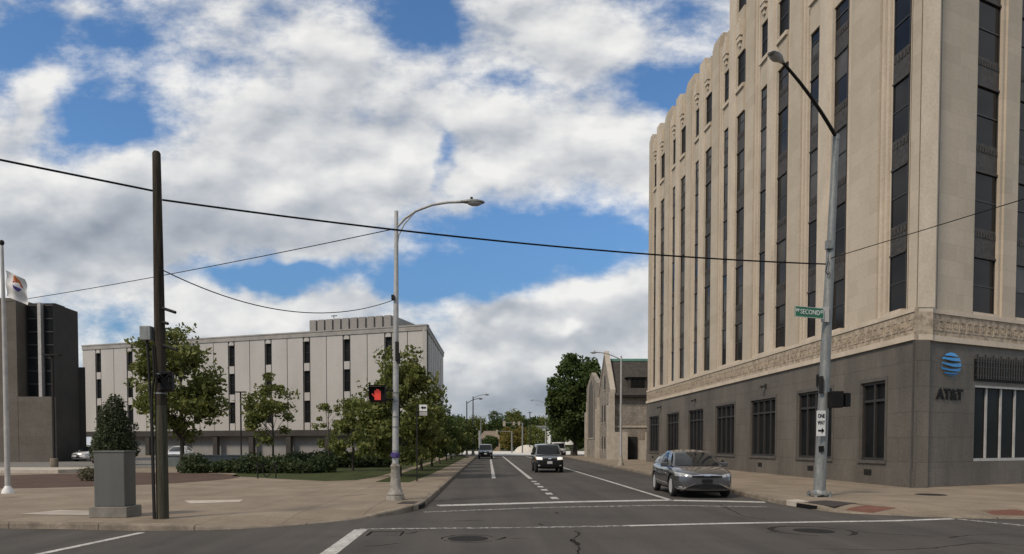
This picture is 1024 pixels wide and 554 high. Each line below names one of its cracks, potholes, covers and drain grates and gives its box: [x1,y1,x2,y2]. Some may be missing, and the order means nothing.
drain grate [786,499,856,509]
